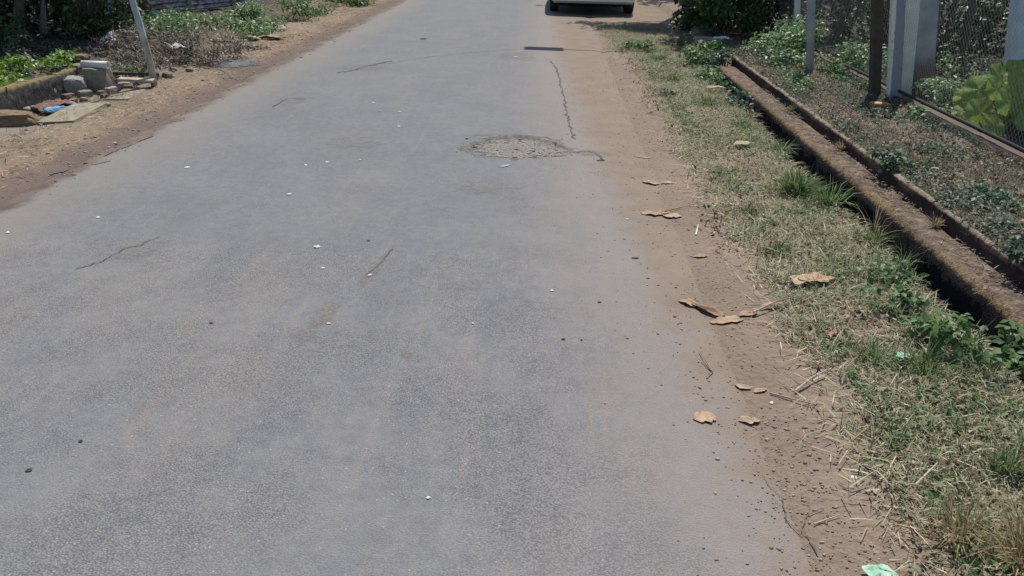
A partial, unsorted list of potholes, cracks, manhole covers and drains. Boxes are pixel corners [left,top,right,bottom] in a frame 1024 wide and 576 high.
crack [460,61,604,160]
pothole [456,134,573,160]
